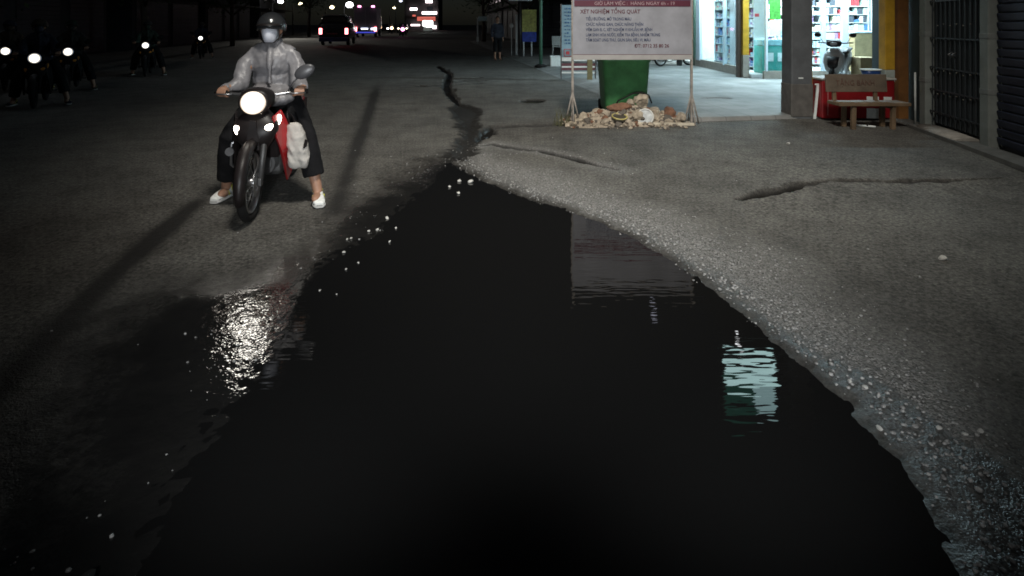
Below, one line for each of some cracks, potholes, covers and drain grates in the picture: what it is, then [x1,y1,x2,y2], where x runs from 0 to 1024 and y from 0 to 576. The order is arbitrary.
pothole [116,162,983,576]
crack [409,66,487,106]
crack [478,123,620,170]
crack [733,177,1024,202]
